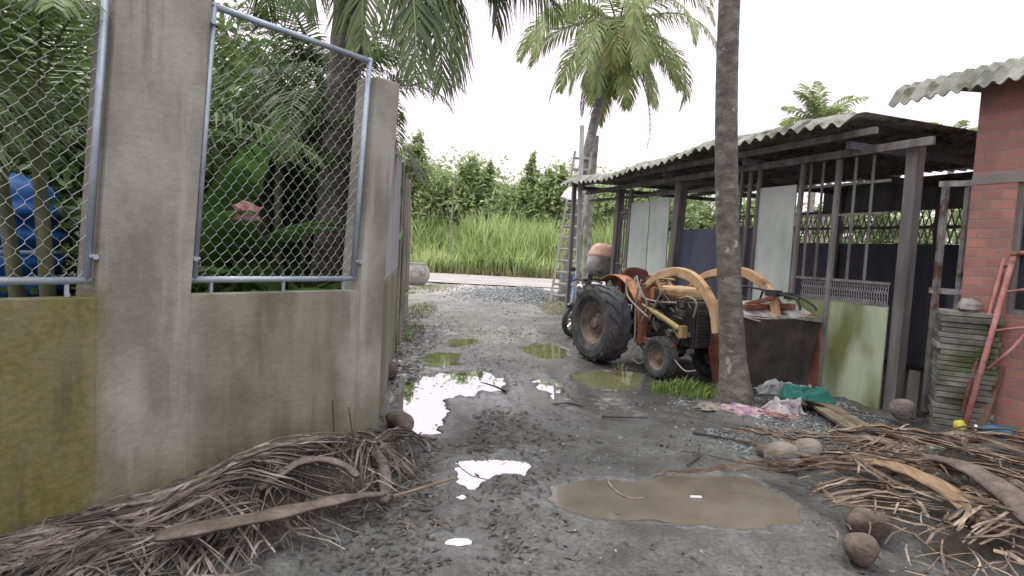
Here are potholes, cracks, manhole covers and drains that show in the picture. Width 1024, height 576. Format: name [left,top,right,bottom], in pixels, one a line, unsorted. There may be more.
pothole [564,369,648,391]
pothole [539,468,813,534]
pothole [390,366,518,437]
